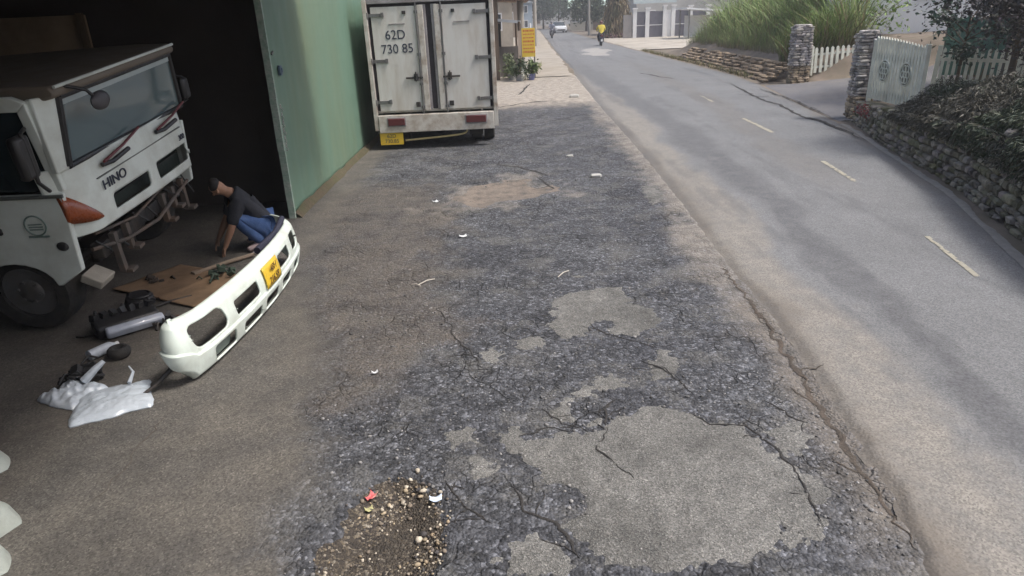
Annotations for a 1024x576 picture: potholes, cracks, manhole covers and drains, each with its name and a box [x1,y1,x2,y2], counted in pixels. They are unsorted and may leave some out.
crack [498,162,554,190]
crack [513,485,580,558]
crack [583,323,691,392]
crack [436,306,479,369]
crack [687,268,919,552]
crack [731,84,865,140]
pothole [314,478,445,576]
crack [520,399,634,478]
crack [443,481,491,529]
